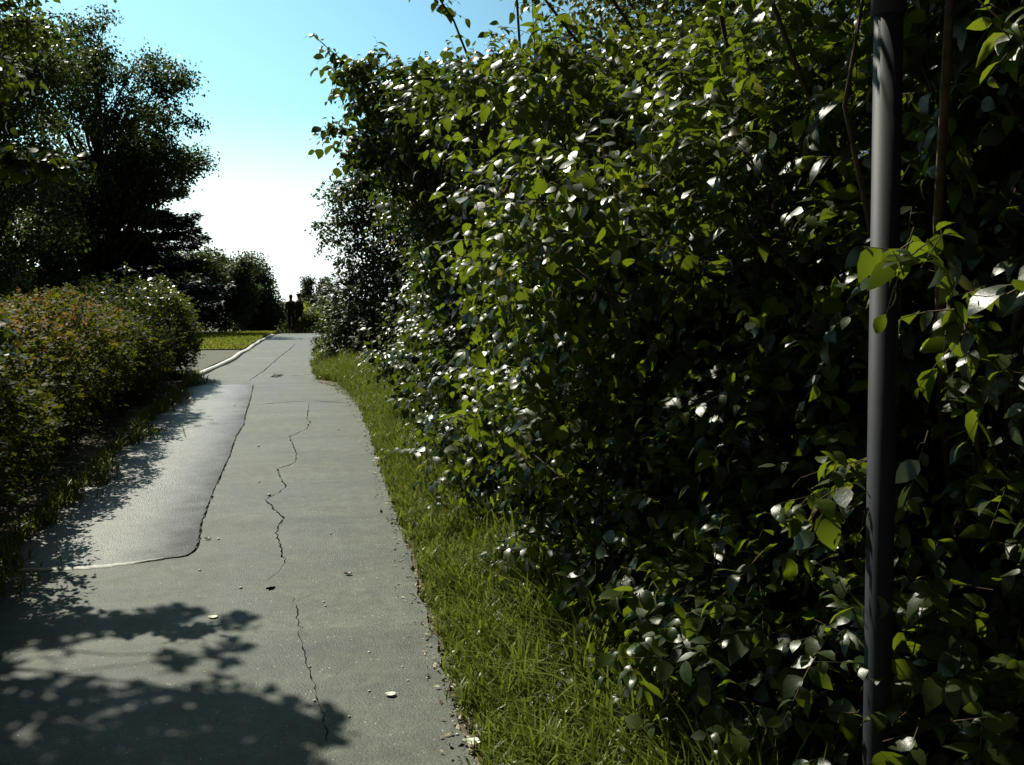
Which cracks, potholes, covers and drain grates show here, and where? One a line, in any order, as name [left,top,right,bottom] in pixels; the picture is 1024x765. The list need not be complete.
crack [293,597,329,745]
crack [259,401,342,580]
